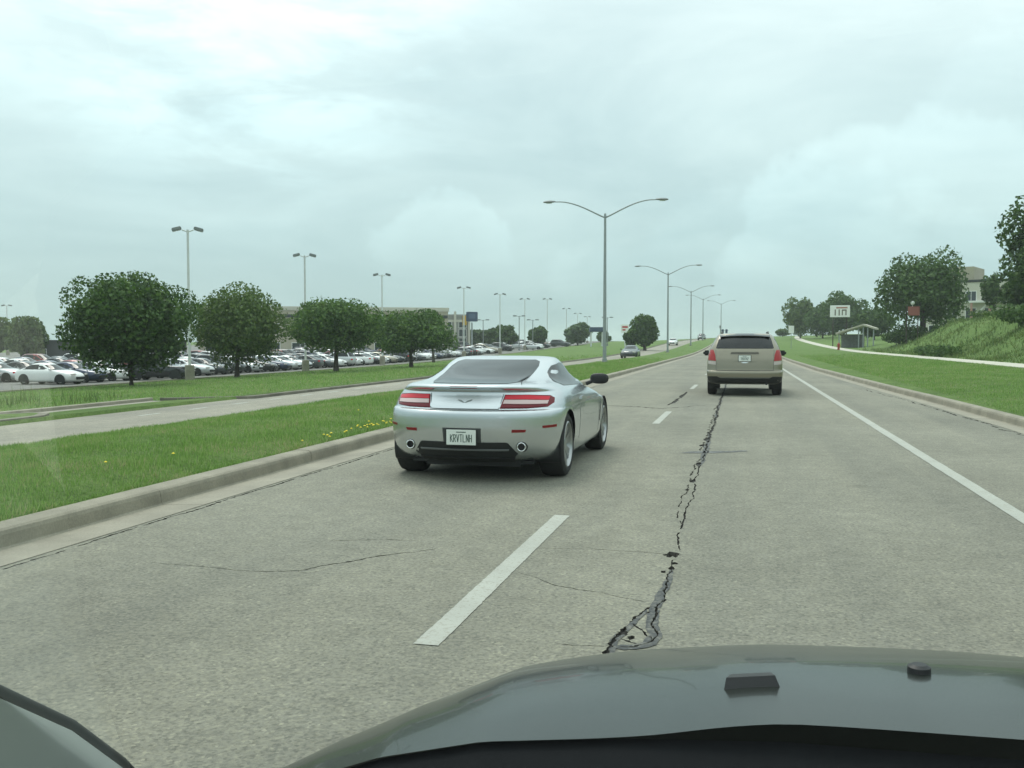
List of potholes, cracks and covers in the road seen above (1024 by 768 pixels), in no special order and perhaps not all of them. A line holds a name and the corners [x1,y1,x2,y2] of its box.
crack [518,572,640,601]
crack [629,392,701,409]
